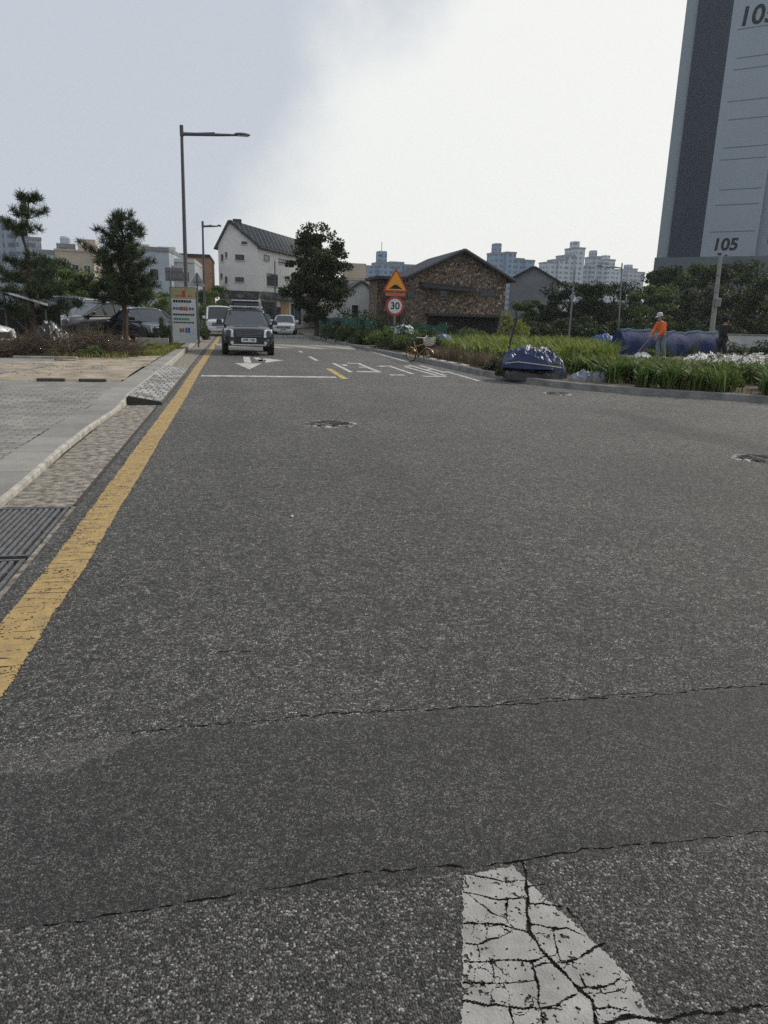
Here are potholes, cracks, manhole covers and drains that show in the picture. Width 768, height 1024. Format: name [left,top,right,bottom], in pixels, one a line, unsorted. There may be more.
drain grate [0,507,69,561]
manhole cover [730,454,768,464]
drain grate [0,559,26,591]
manhole cover [303,420,357,428]
crack [47,831,768,1024]
crack [133,683,768,734]
